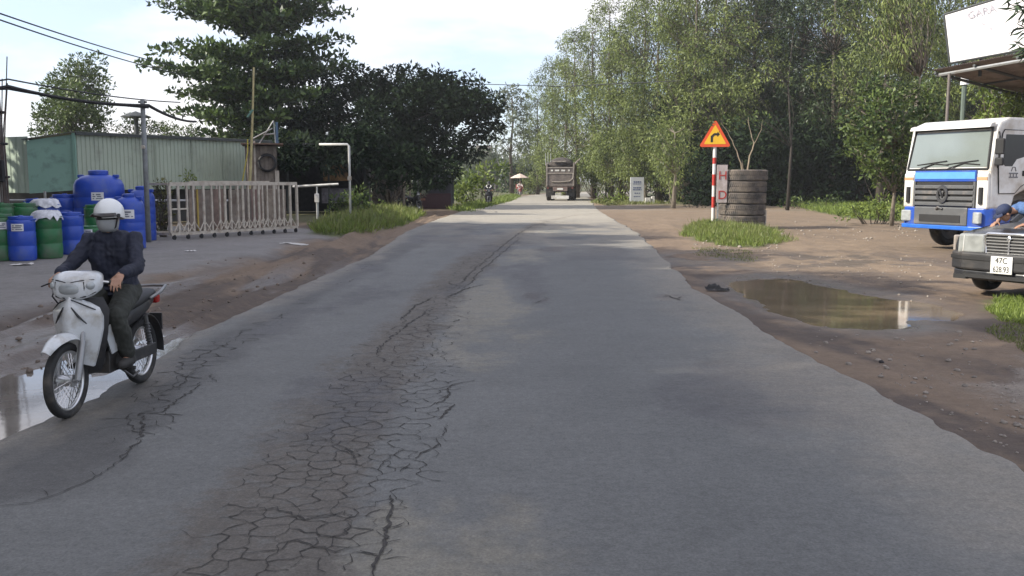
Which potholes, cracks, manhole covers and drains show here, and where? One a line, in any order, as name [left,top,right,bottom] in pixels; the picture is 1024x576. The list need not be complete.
crack [0,321,270,506]
crack [172,350,474,576]
crack [347,214,583,367]
